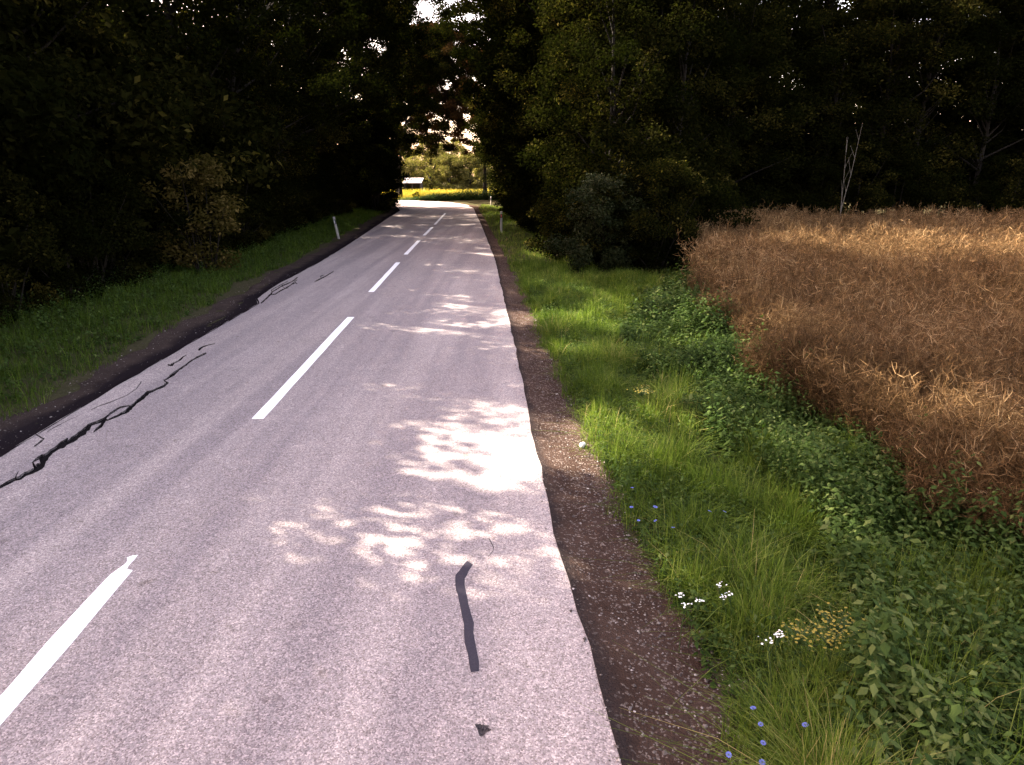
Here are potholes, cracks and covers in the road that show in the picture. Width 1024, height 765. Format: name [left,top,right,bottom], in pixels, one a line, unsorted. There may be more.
pothole [475,724,491,737]
crack [0,343,215,488]
crack [261,277,298,304]
